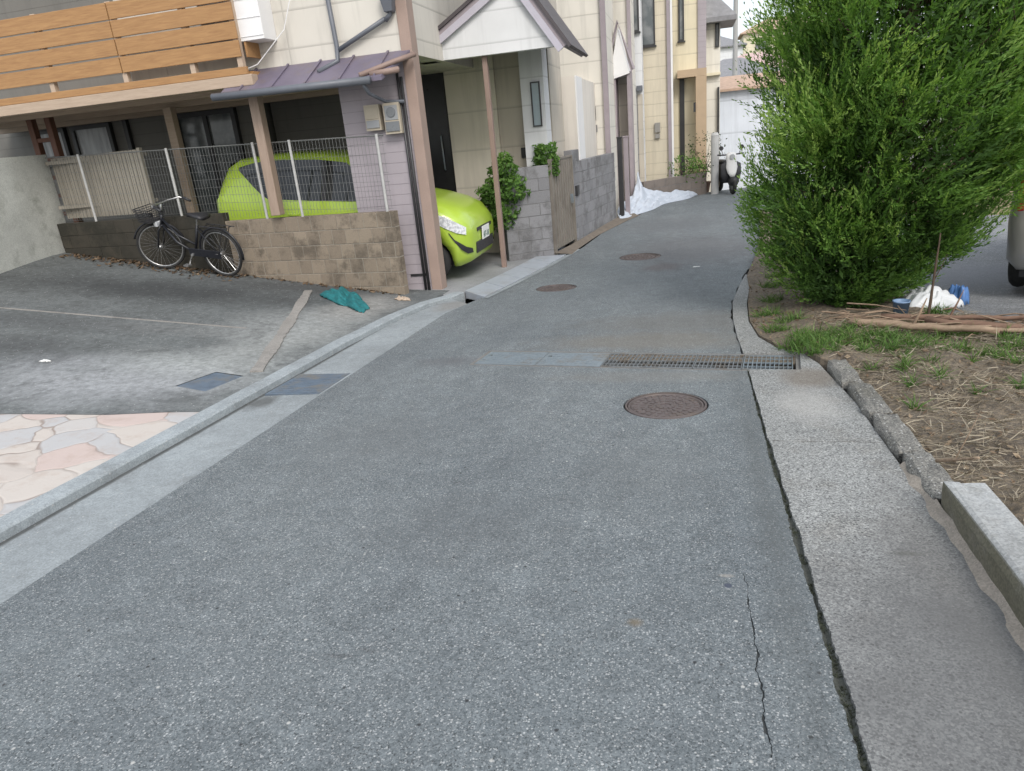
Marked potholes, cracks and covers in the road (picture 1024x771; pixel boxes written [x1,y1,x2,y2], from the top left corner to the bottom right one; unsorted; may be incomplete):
manhole cover [537,284,576,292]
crack [744,578,772,758]
manhole cover [625,392,708,419]
